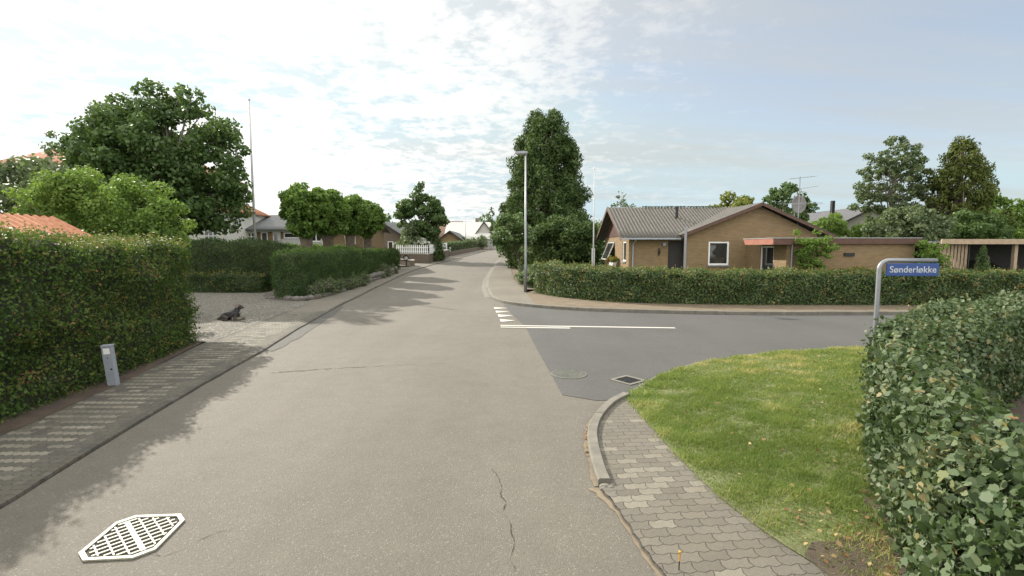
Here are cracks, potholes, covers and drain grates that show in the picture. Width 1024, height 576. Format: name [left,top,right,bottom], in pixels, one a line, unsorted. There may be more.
drain grate [609,375,644,385]
drain grate [78,514,185,562]
manhole cover [551,369,587,379]
